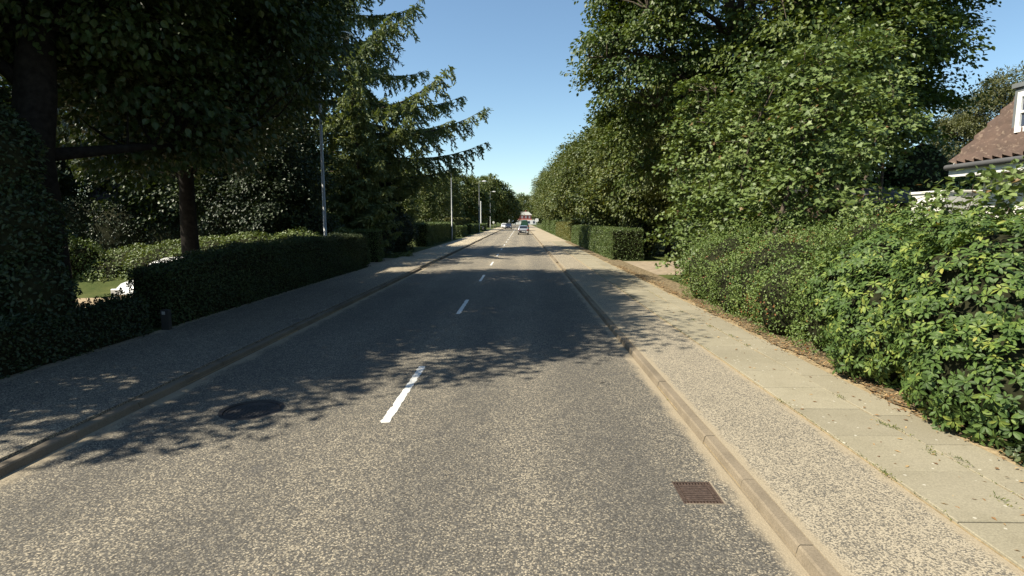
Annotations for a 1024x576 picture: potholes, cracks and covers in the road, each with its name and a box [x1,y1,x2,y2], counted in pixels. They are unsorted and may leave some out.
manhole cover [218,400,285,420]
drain grate [672,481,727,505]
